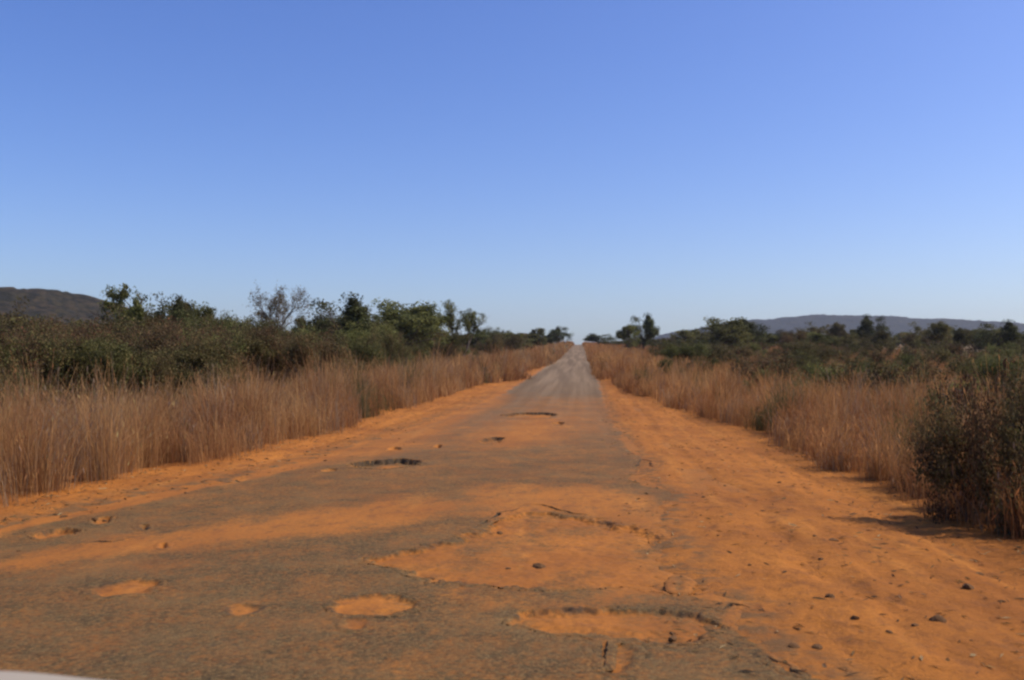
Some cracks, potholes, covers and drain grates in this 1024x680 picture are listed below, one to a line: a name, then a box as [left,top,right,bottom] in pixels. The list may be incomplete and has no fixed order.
pothole [78,575,168,601]
pothole [501,605,734,648]
crack [591,635,619,671]
pothole [343,458,426,469]
pothole [322,591,436,618]
pothole [359,511,715,596]
pothole [25,526,85,540]
pothole [85,515,117,525]
